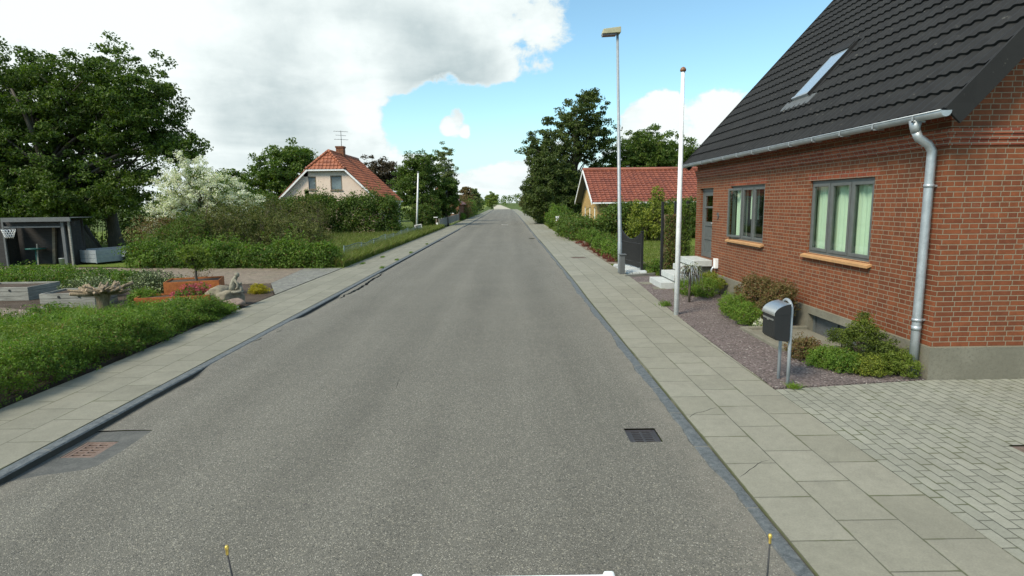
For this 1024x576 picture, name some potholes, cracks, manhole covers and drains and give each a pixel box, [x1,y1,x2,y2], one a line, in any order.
drain grate [625,430,662,442]
crack [341,273,383,298]
drain grate [61,442,117,458]
